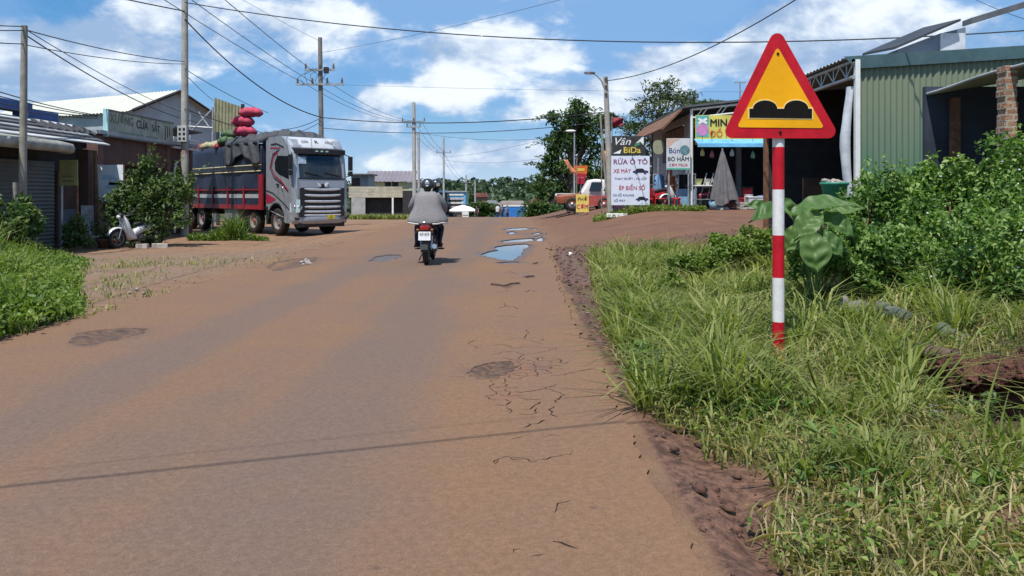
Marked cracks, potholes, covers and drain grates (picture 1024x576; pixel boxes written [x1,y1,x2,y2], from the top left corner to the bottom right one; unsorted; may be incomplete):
pothole [480,244,531,261]
crack [450,272,595,464]
